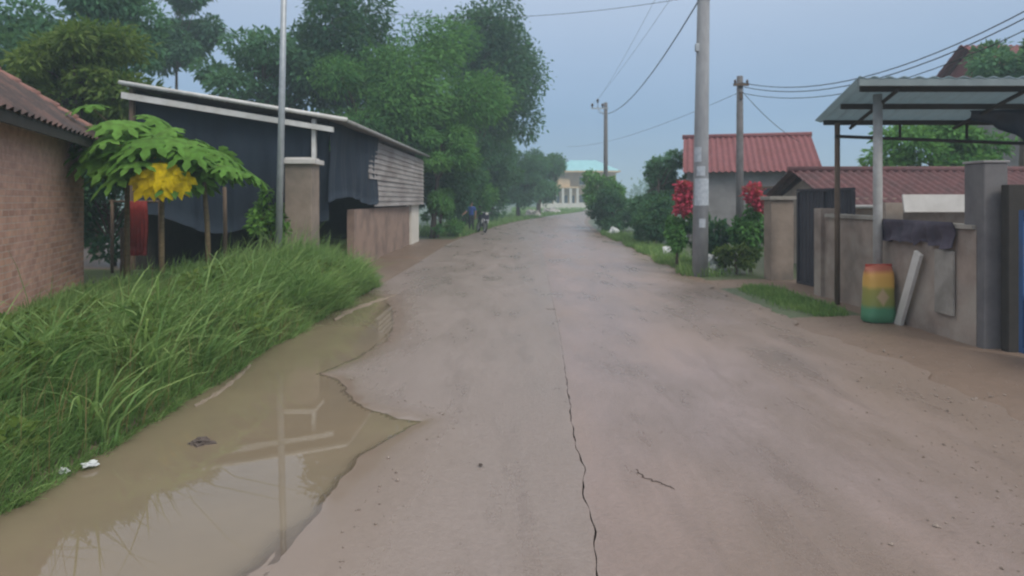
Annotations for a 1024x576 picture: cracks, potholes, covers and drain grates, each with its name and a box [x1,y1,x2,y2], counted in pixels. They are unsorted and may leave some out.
crack [547,274,598,576]
